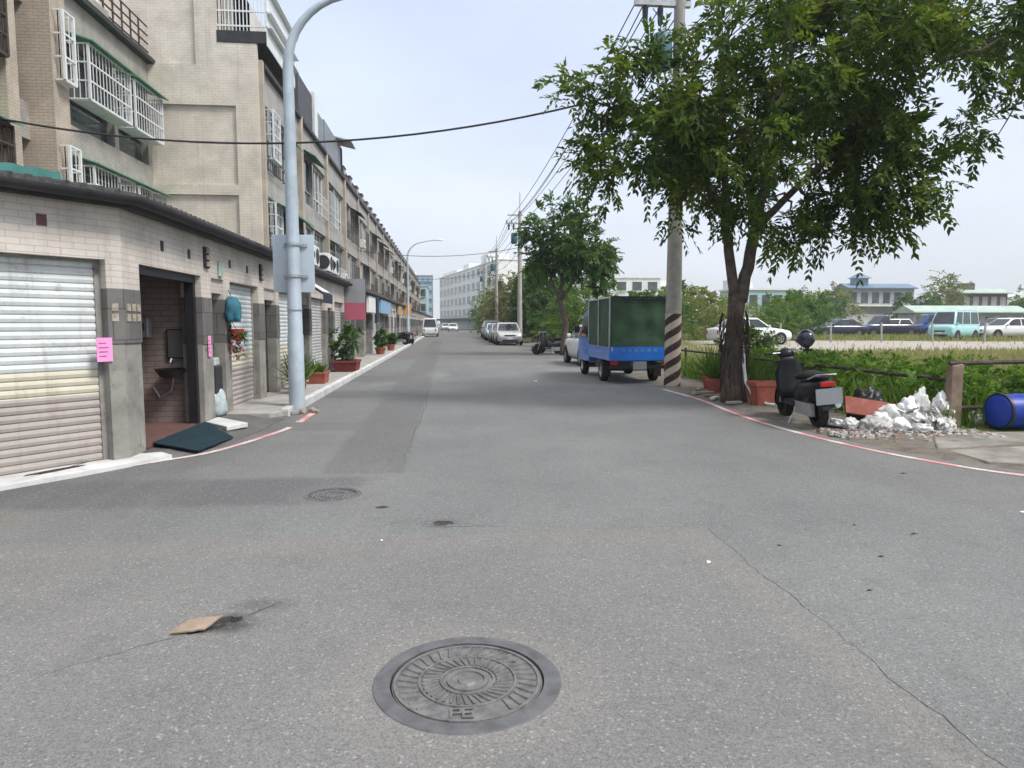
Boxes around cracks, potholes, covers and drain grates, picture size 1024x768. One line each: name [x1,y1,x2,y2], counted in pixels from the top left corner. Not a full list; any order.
manhole cover [303,487,362,502]
crack [27,600,284,682]
manhole cover [372,637,561,736]
